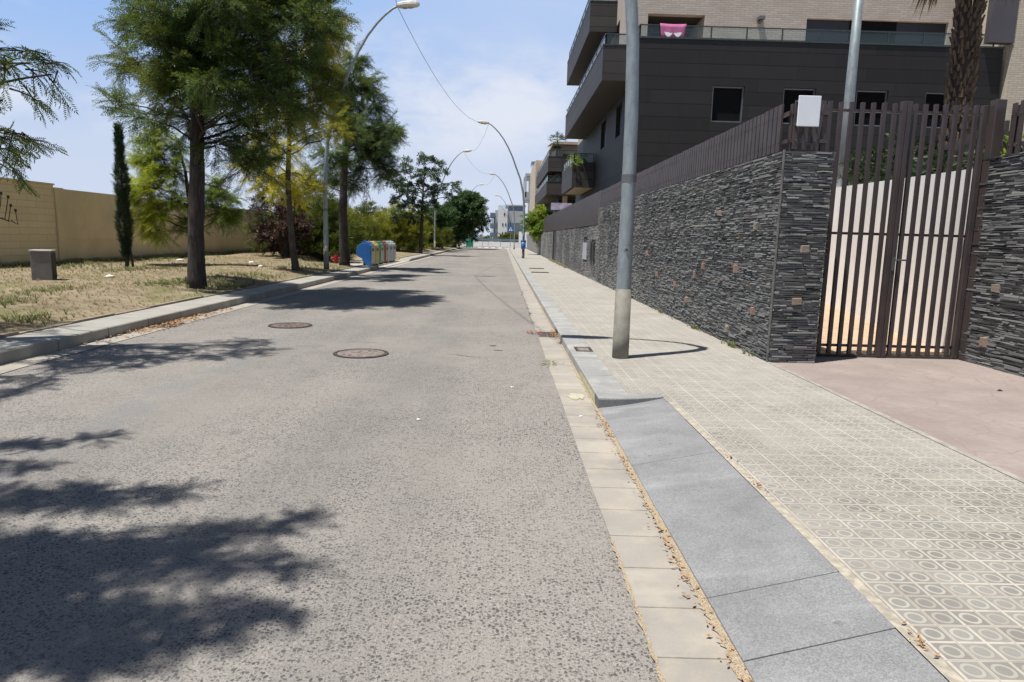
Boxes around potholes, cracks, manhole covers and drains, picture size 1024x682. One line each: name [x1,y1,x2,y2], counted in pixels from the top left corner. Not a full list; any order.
manhole cover [333,348,389,359]
